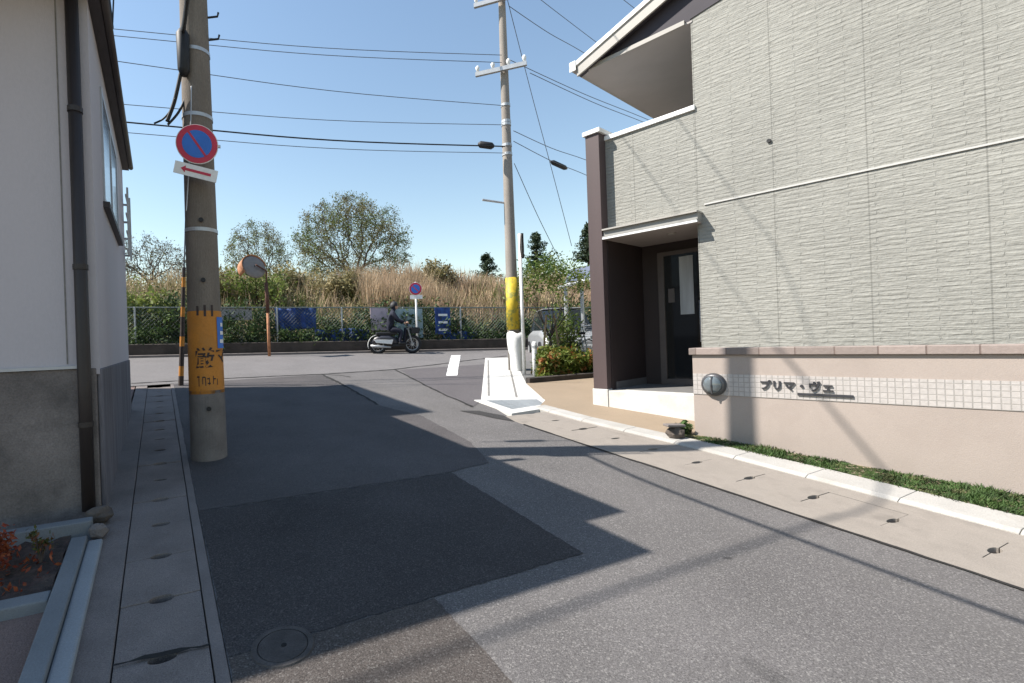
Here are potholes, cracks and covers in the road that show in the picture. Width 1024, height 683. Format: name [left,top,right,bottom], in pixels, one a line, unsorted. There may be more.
manhole cover [250,626,314,669]
crack [113,644,209,666]
